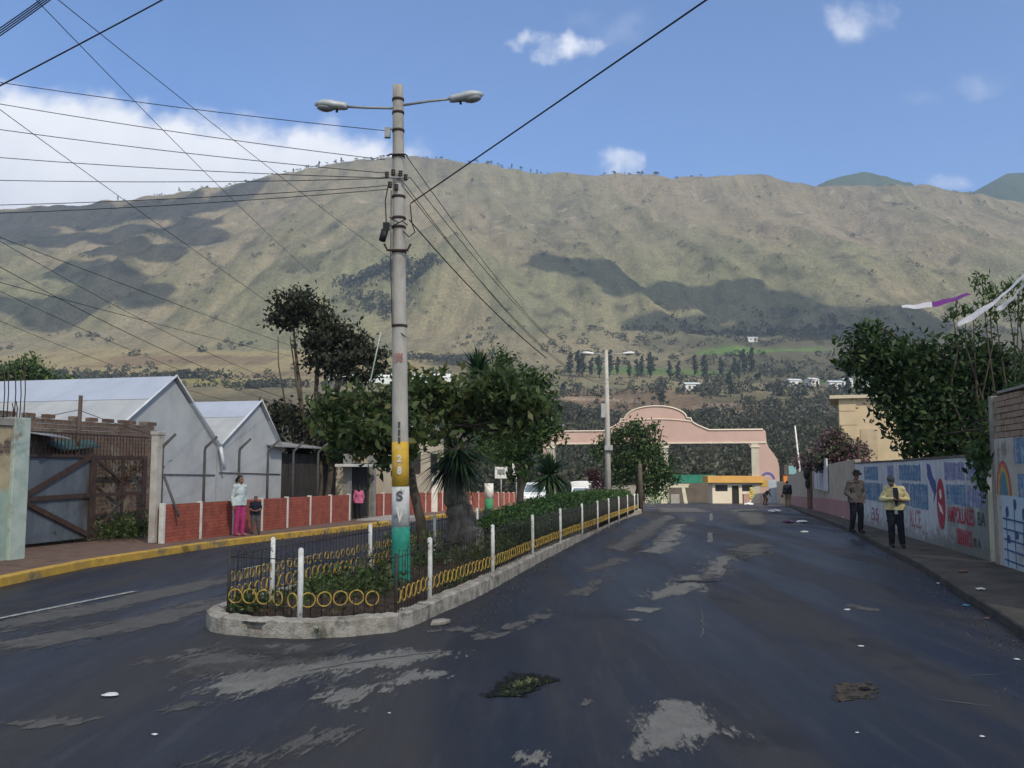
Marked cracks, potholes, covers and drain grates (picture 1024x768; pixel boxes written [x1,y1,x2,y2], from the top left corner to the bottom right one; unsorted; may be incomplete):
pothole [832,681,881,702]
pothole [479,671,560,698]
